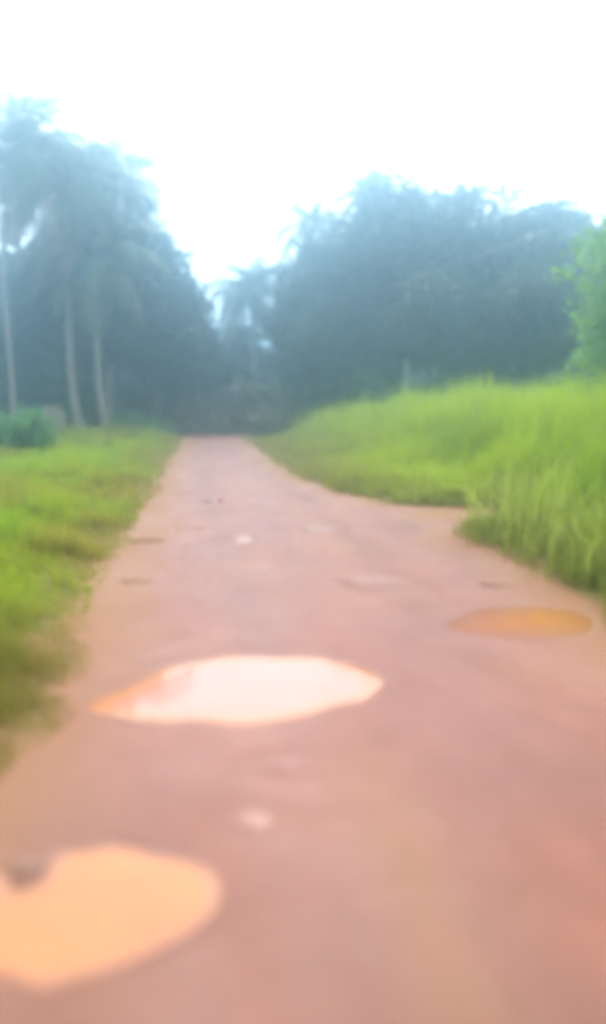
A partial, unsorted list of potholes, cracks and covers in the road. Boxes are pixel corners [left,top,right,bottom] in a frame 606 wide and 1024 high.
pothole [336,575,408,592]
pothole [84,655,390,725]
pothole [445,605,599,641]
pothole [0,841,229,990]
